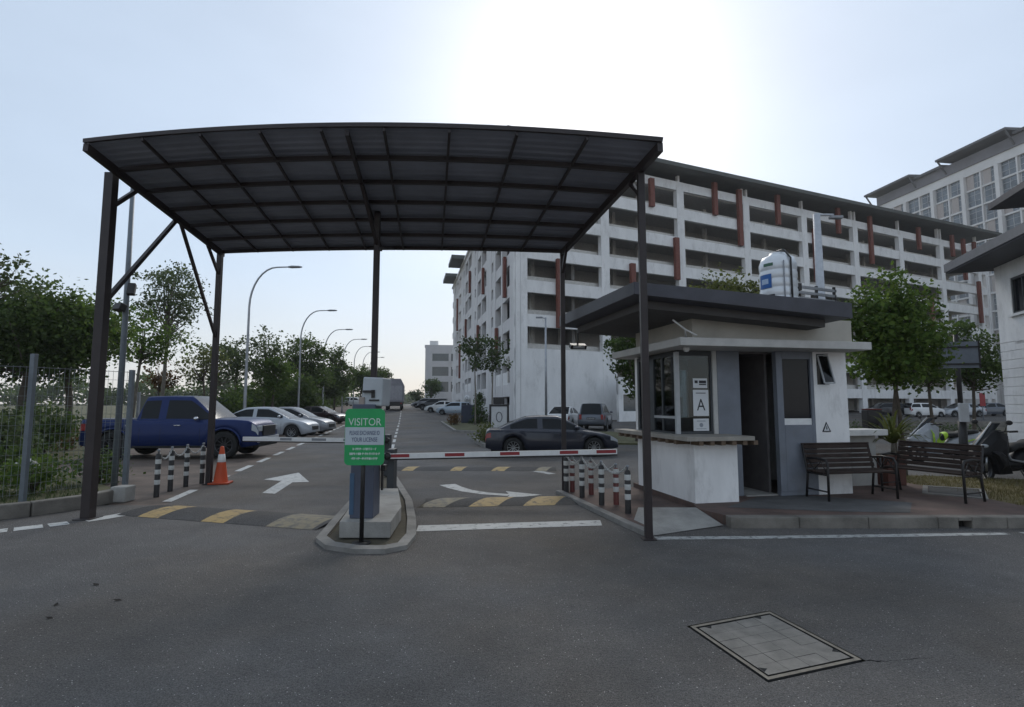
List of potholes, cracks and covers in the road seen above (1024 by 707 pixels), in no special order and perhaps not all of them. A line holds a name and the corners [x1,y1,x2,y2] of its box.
manhole cover [690,611,862,682]
